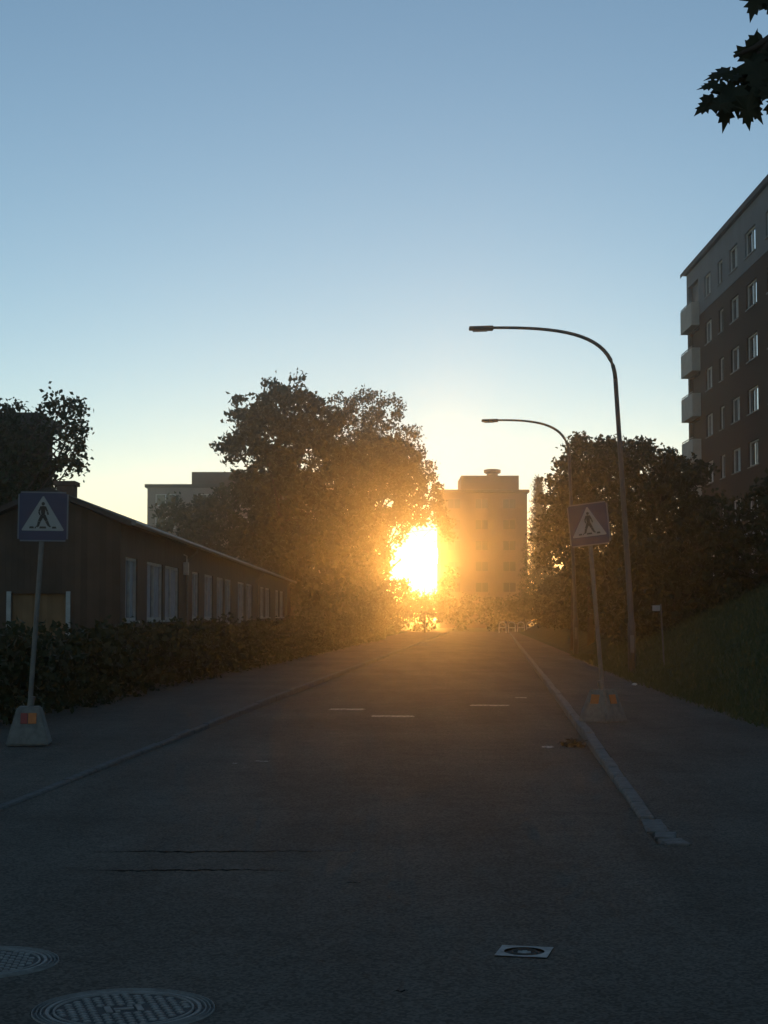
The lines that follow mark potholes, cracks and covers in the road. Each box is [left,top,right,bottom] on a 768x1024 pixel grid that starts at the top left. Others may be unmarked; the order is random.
manhole cover [0,946,60,978]
manhole cover [30,988,216,1024]
utility cover [495,945,553,958]
crack [99,850,355,872]
